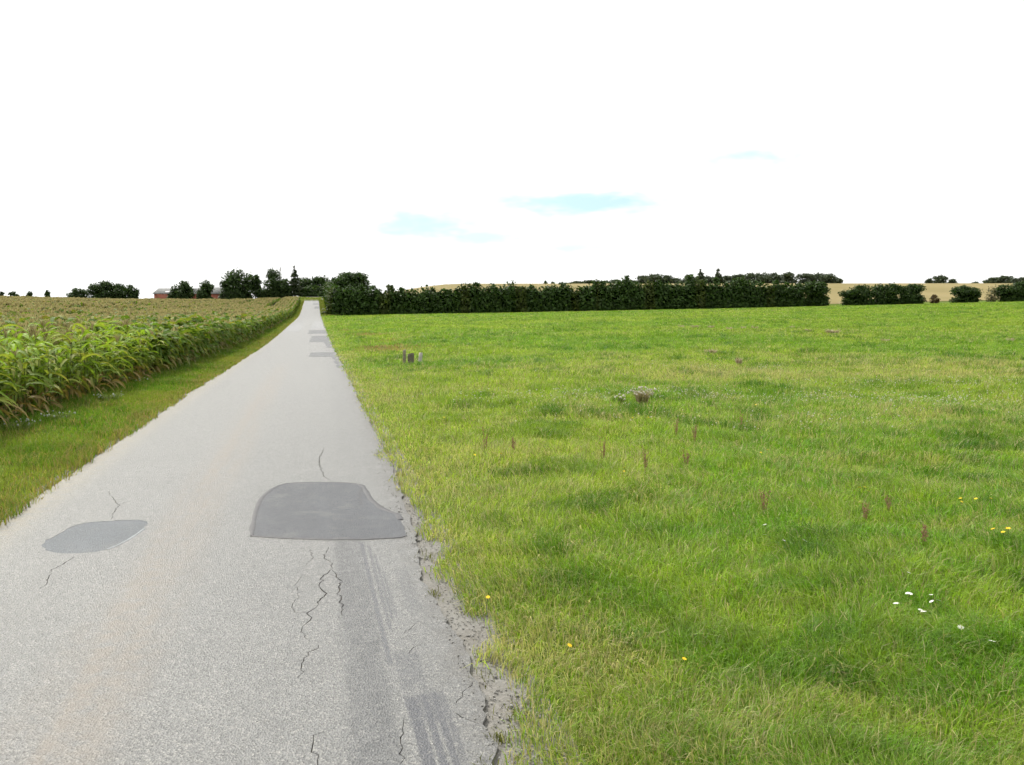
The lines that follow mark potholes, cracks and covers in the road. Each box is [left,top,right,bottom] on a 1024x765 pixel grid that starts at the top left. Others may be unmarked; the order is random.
crack [291,547,344,639]
